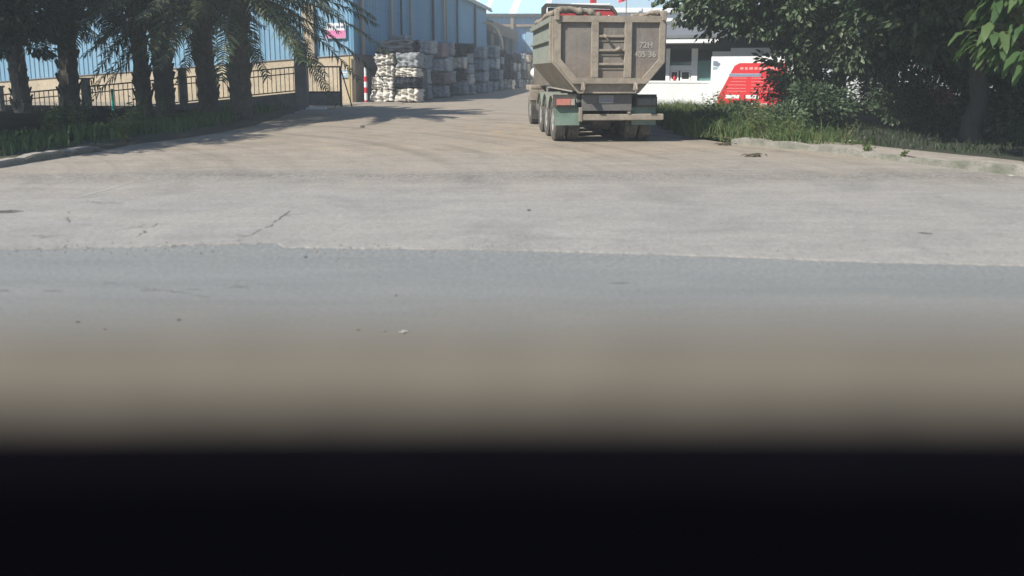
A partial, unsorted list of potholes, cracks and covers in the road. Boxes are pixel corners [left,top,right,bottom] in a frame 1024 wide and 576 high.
crack [238,207,308,241]
